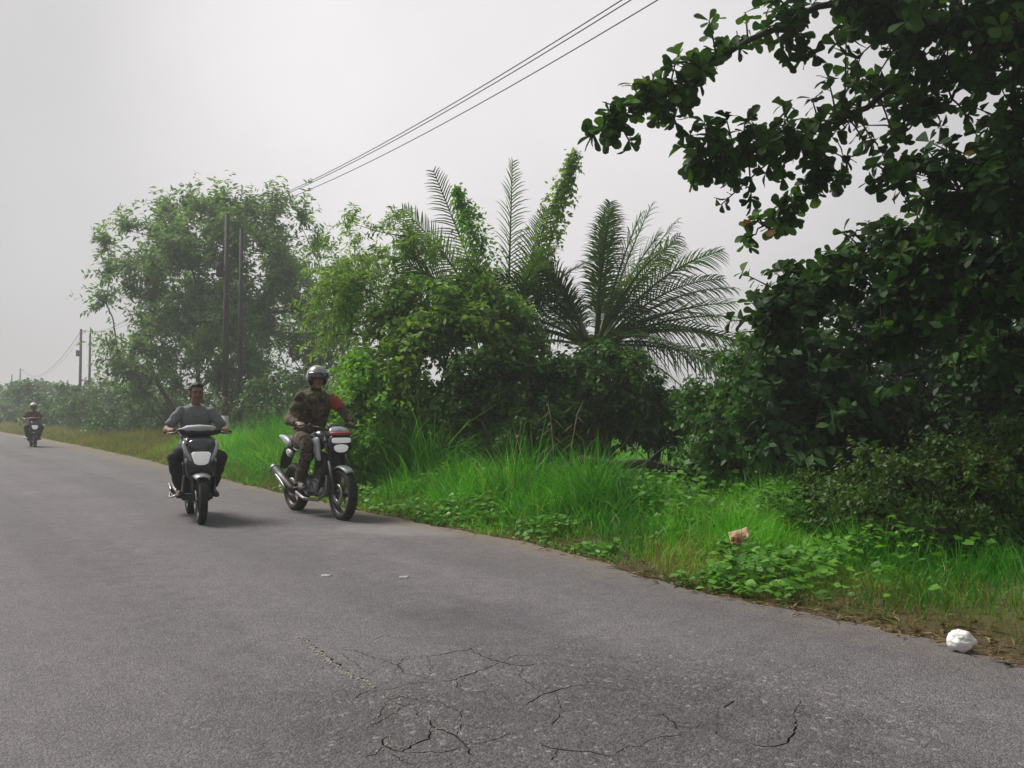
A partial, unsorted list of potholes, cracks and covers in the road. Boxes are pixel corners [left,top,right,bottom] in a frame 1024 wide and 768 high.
crack [297,635,819,766]
